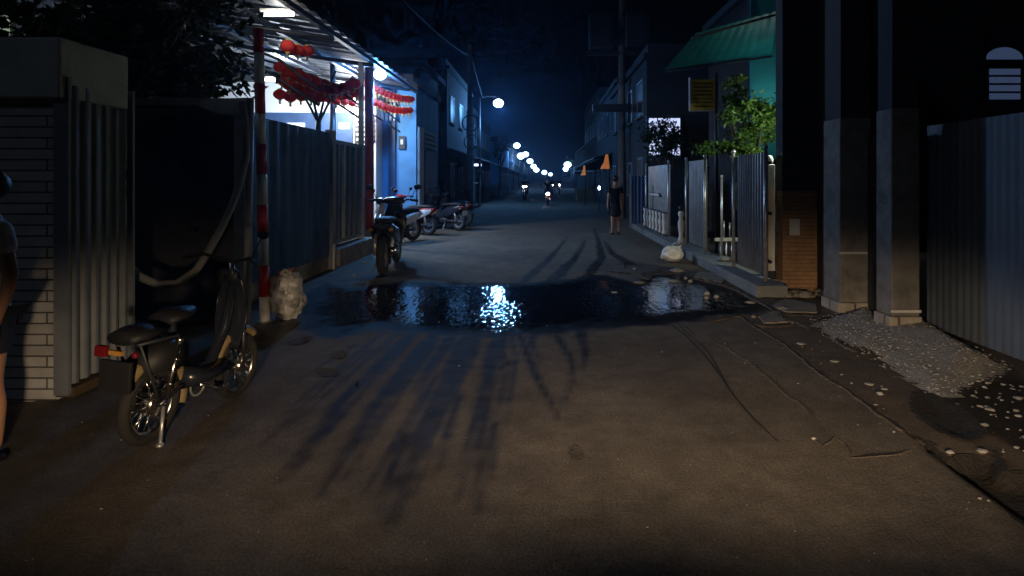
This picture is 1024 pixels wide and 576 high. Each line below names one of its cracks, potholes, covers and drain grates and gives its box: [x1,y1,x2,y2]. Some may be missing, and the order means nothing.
pothole [903,431,1024,526]
pothole [908,390,992,441]
pothole [330,350,348,359]
pothole [568,444,584,461]
crack [692,269,911,458]
pothole [316,368,339,376]
pothole [287,336,314,345]
